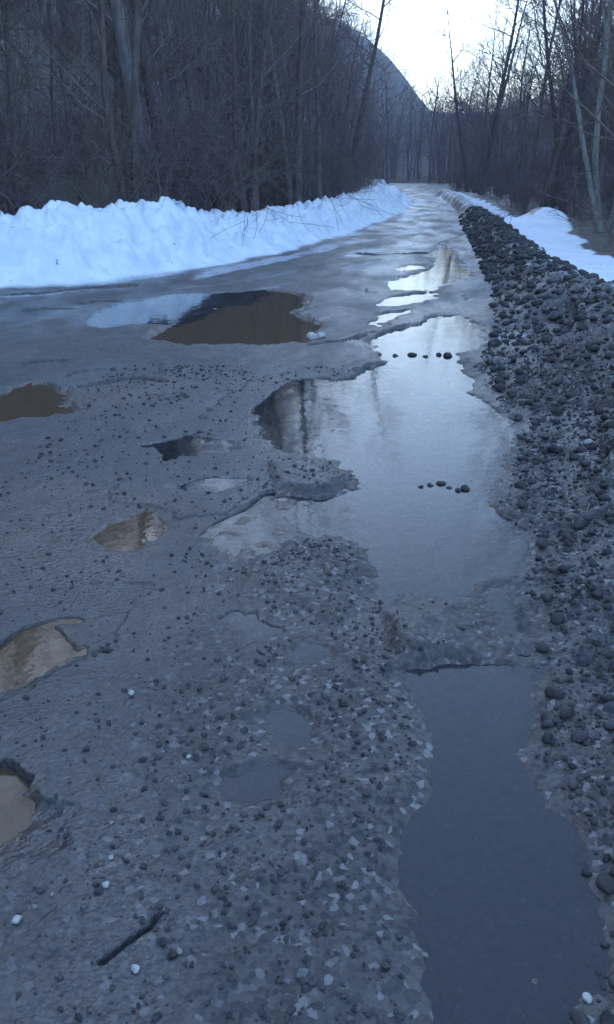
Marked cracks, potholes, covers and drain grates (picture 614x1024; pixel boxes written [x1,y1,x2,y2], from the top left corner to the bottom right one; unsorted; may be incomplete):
pothole [381,239,483,292]
pothole [75,288,268,329]
pothole [370,290,449,307]
pothole [137,429,255,461]
